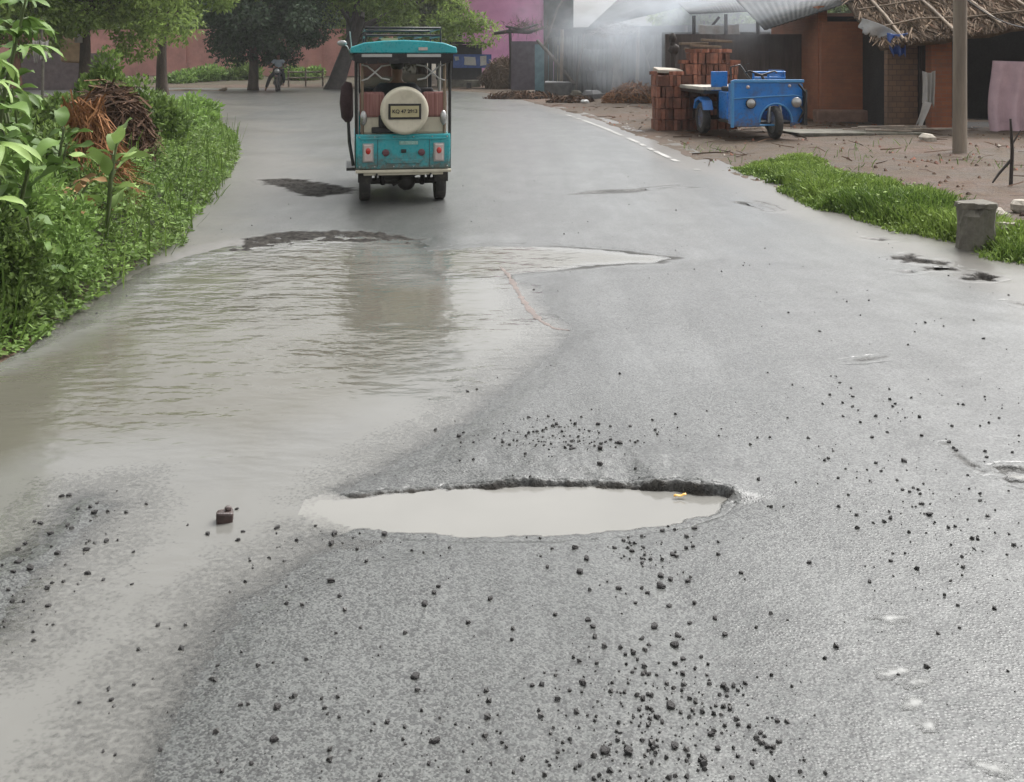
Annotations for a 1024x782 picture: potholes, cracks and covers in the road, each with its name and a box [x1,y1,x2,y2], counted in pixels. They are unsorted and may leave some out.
crack [559,184,793,213]
pothole [910,264,969,273]
pothole [880,253,959,268]
crack [937,441,999,476]
pothole [947,269,1011,283]
pothole [298,476,743,542]
